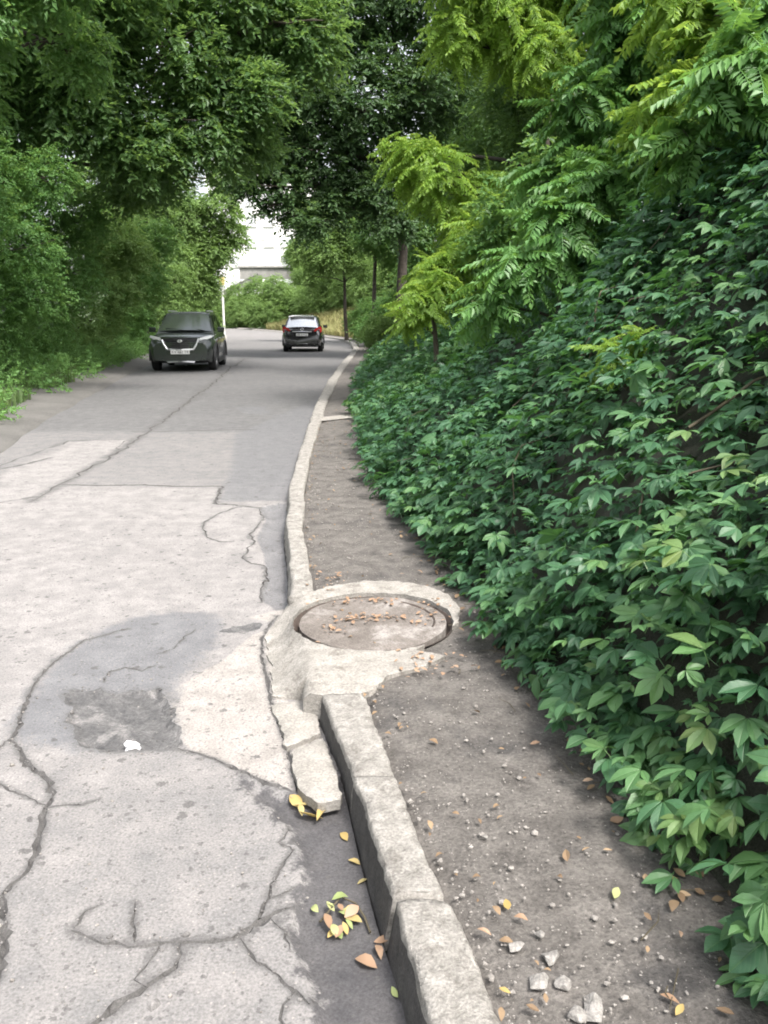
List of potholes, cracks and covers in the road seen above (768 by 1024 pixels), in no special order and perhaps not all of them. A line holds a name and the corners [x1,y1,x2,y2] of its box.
crack [0,358,315,1024]
manhole cover [293,596,453,651]
